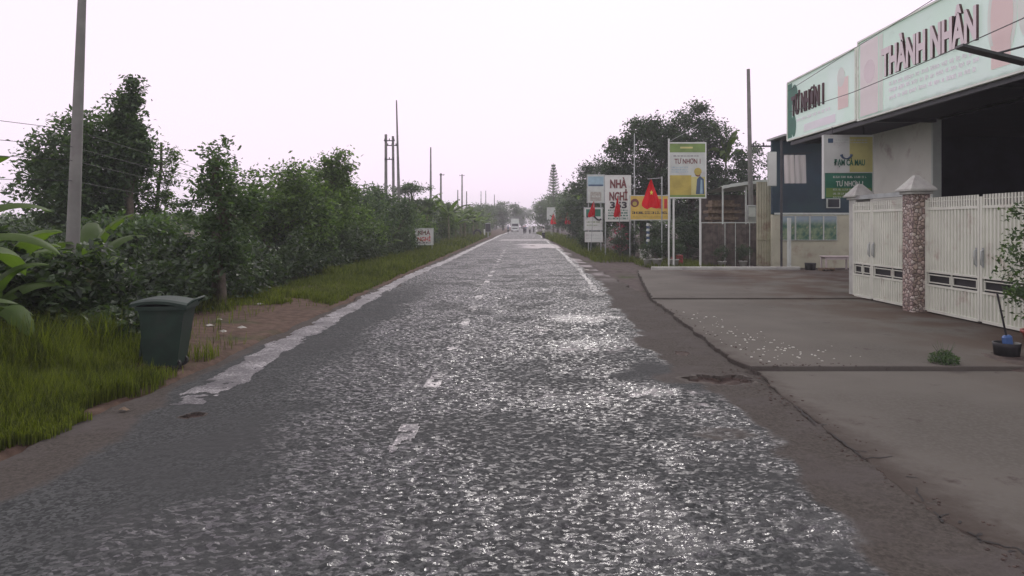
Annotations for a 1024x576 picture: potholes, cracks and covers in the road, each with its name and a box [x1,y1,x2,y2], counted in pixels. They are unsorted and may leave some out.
crack [906,476,1024,554]
pothole [176,411,208,419]
pothole [675,373,760,387]
